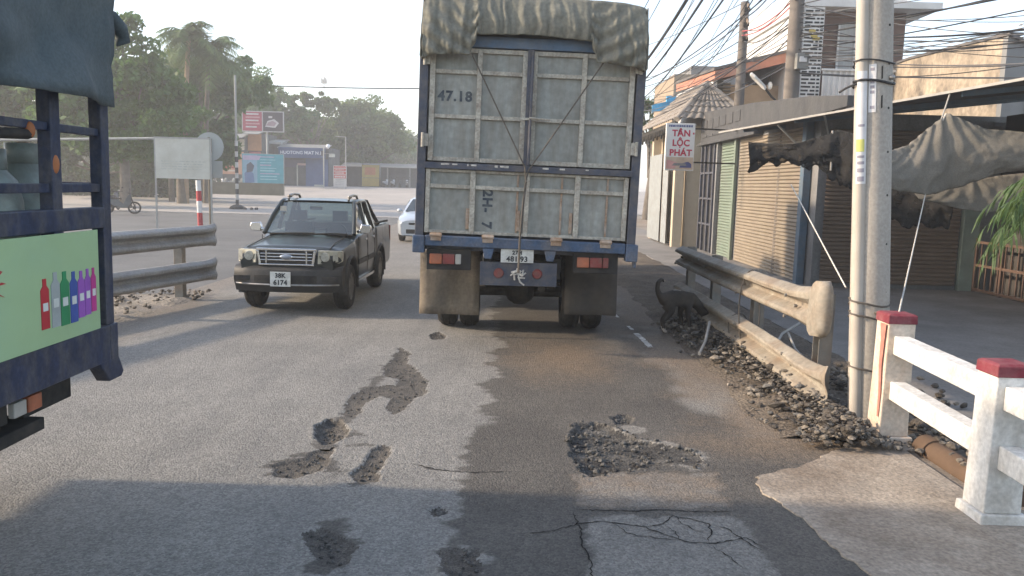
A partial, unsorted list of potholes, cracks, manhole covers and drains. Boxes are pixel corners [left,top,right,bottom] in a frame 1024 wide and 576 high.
pothole [259,445,346,485]
crack [522,512,763,576]
crack [415,464,510,473]
pothole [286,521,375,576]
pothole [559,419,715,482]
pothole [303,416,359,450]
pothole [422,331,453,341]
pothole [602,411,645,427]
pothole [335,440,402,487]
pothole [331,345,438,420]
